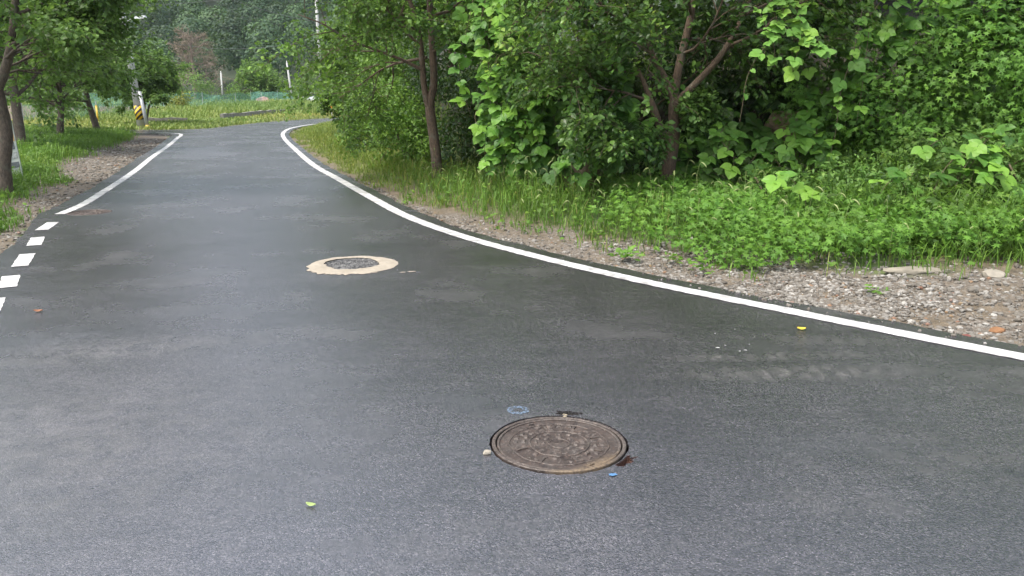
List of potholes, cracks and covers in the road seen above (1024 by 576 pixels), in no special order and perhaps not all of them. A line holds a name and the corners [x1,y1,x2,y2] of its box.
manhole cover [492,417,626,475]
